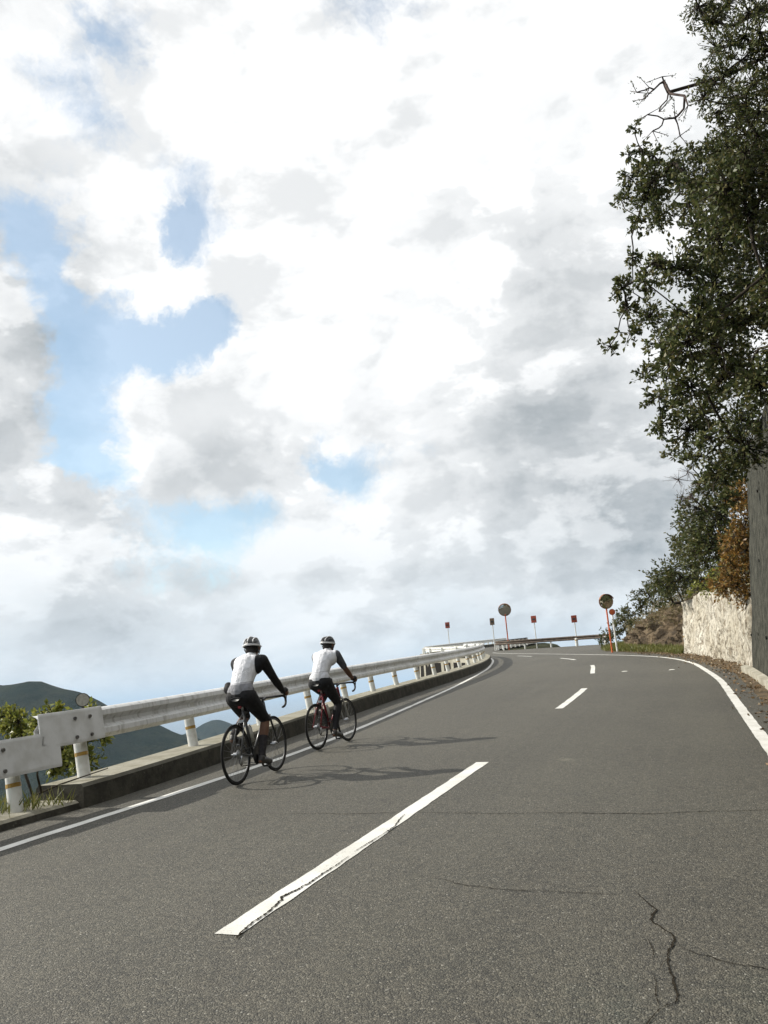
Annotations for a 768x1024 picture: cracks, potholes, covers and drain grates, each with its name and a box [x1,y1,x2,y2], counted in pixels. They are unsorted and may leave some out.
crack [422,876,766,1024]
crack [236,809,768,938]
